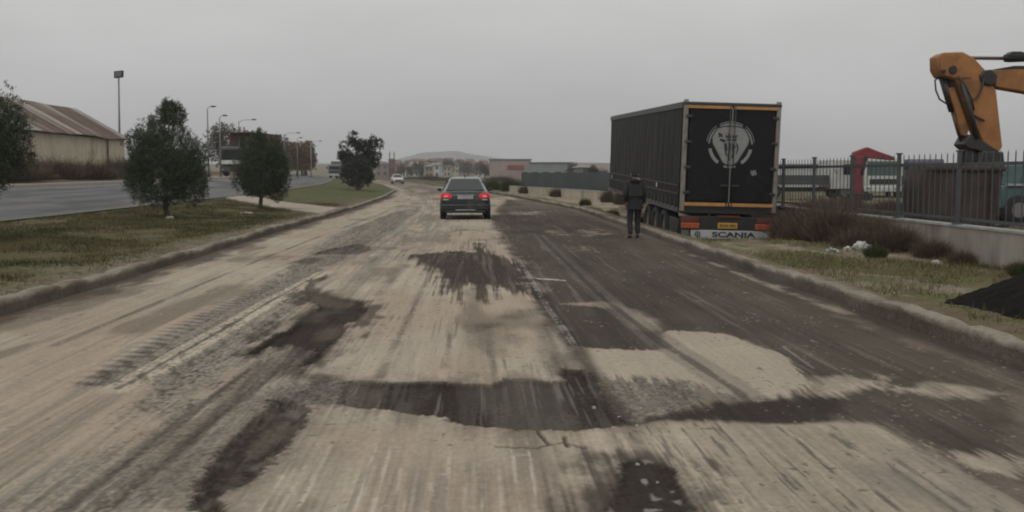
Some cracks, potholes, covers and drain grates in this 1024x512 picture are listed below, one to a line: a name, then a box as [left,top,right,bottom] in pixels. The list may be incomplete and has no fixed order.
pothole [242,291,375,374]
pothole [311,244,372,255]
crack [494,429,588,449]
pothole [181,397,320,512]
pothole [600,457,699,512]
pothole [334,368,632,432]
